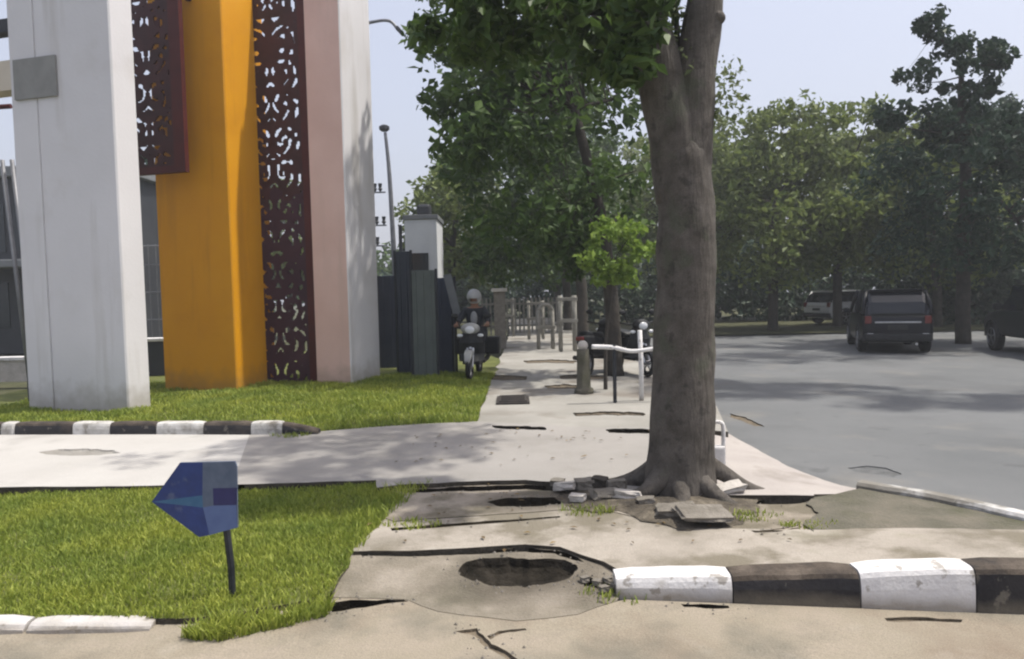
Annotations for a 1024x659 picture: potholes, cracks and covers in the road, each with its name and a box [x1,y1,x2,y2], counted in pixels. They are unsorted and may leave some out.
crack [730,414,765,427]
crack [573,411,649,433]
crack [331,599,408,612]
crack [496,548,610,591]
pothole [458,557,578,587]
crack [456,628,526,659]
crack [850,466,901,477]
pothole [488,497,564,507]
